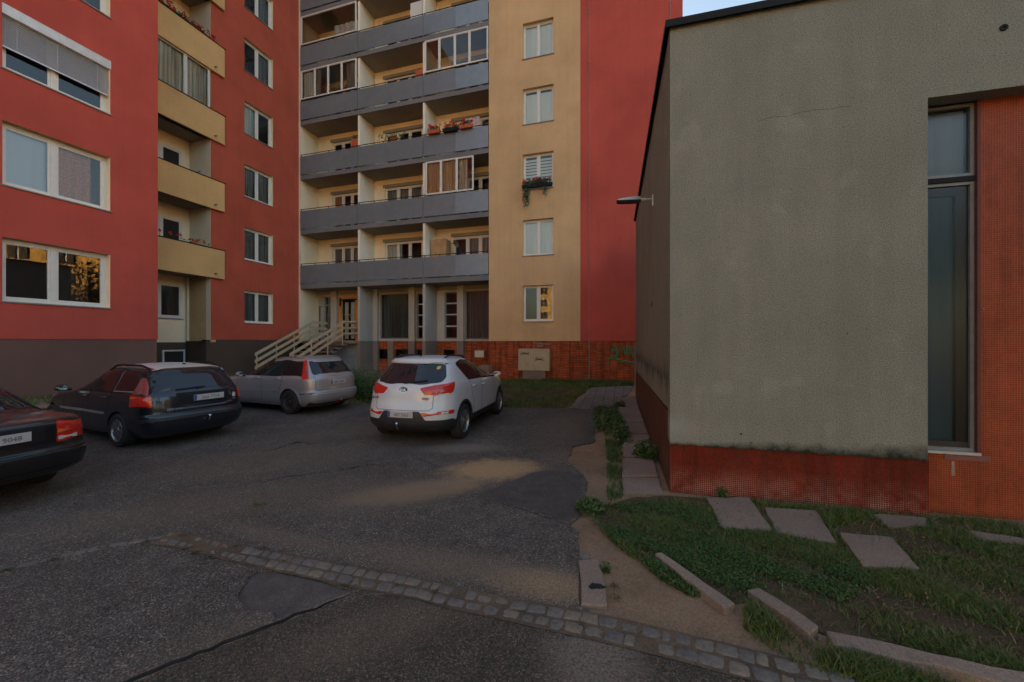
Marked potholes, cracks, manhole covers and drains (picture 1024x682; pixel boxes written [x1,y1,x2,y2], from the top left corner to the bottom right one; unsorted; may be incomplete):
crack [245,464,384,483]
